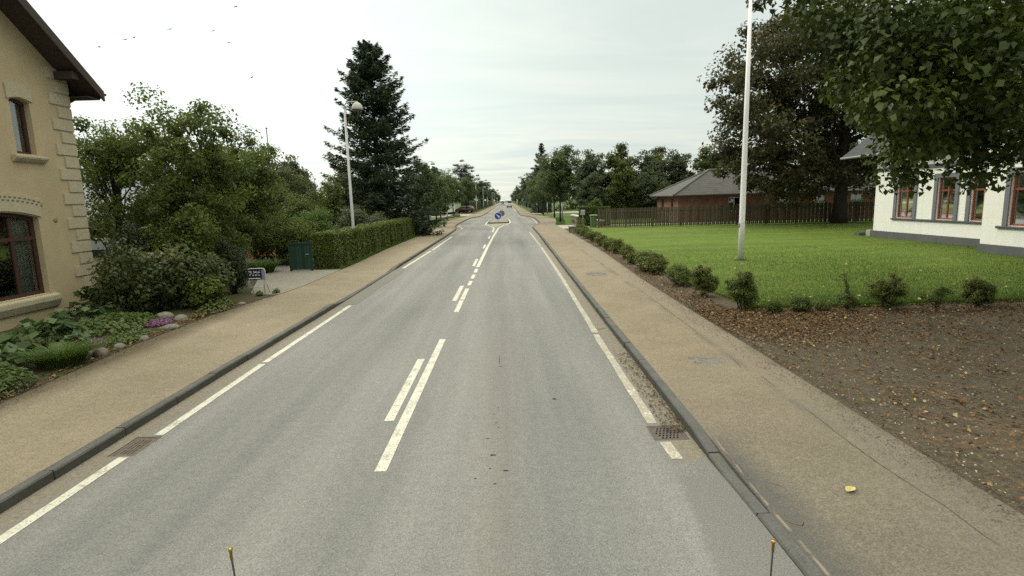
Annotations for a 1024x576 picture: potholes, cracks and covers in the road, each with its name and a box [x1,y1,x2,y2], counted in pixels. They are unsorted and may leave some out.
drain grate [646,425,689,441]
drain grate [109,437,161,457]
